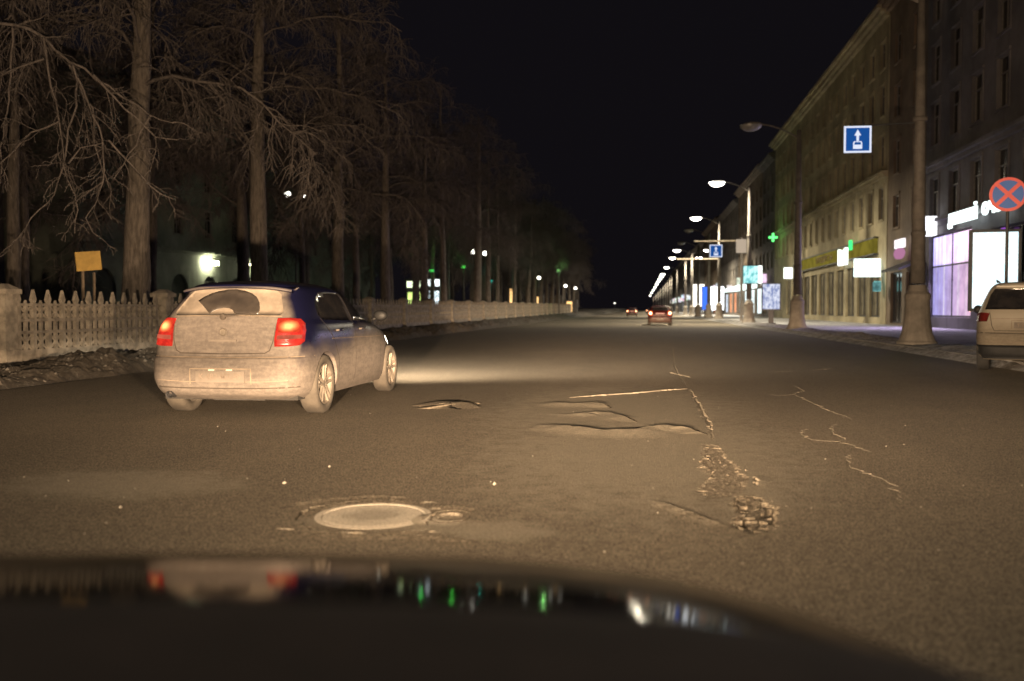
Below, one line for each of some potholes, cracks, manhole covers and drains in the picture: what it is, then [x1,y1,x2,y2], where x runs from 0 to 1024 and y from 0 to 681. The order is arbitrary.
pothole [695,442,750,502]
crack [524,348,714,440]
pothole [411,400,482,410]
crack [644,500,728,527]
pothole [727,495,787,535]
manhole cover [314,503,431,531]
crack [776,368,902,502]
